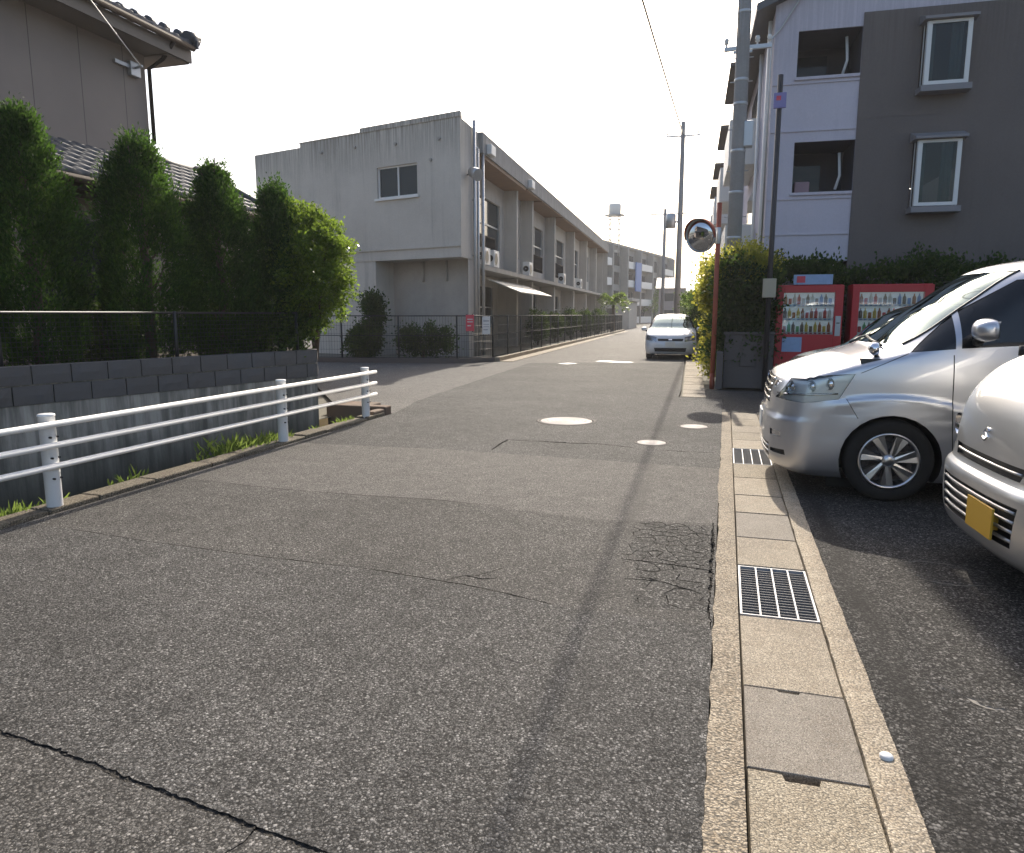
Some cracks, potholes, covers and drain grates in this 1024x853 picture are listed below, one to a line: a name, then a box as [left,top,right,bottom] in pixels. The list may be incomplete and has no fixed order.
crack [620,522,715,629]
drain grate [733,448,773,466]
manhole cover [536,417,597,426]
crack [73,529,550,604]
drain grate [738,565,820,624]
crack [0,730,329,853]
